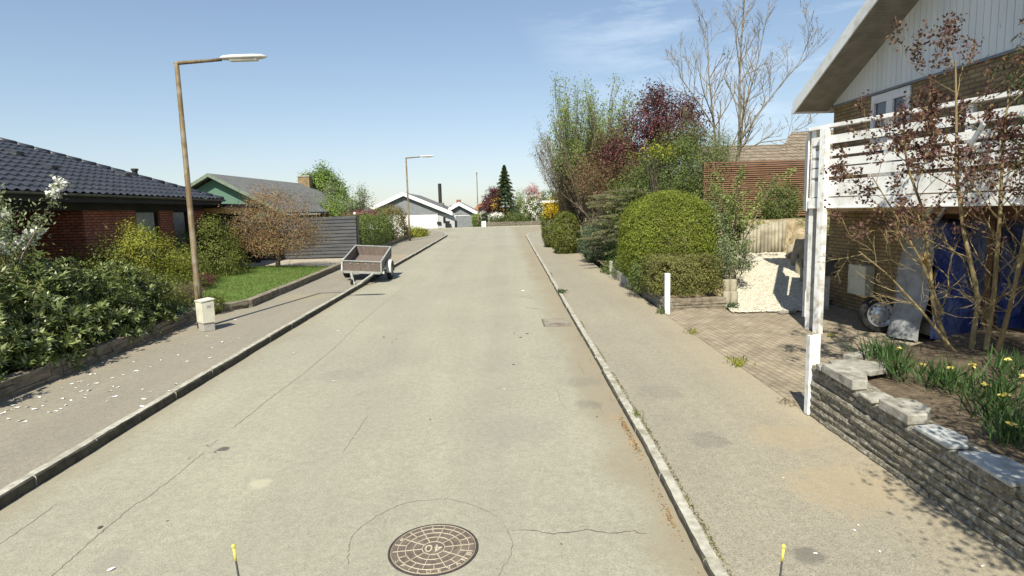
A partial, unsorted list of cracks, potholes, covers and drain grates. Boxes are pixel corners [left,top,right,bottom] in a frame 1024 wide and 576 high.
drain grate [541,318,572,327]
crack [347,499,513,576]
manhole cover [388,524,479,576]
